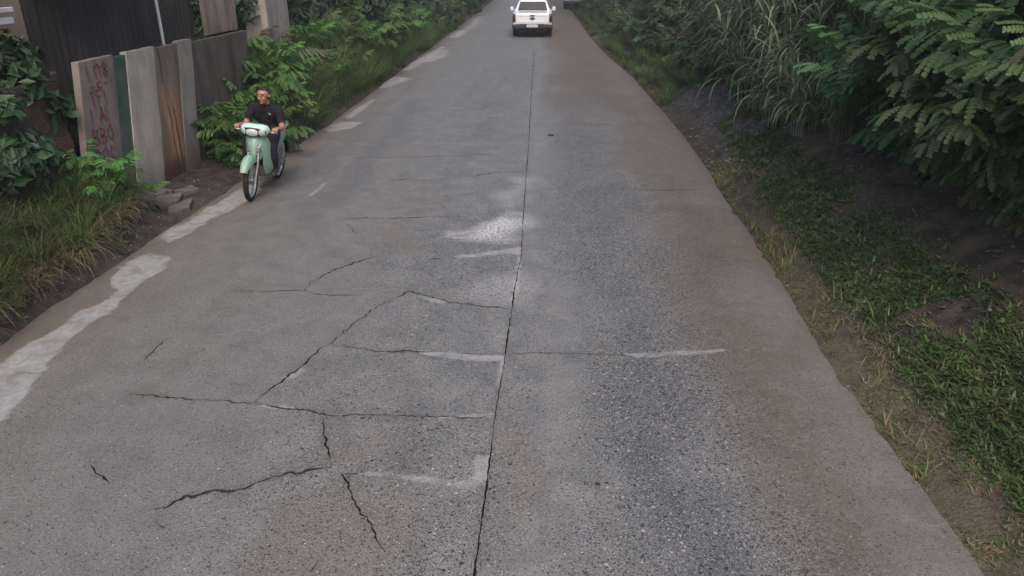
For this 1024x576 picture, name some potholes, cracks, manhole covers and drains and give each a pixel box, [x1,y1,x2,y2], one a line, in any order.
crack [242,257,372,296]
crack [135,291,502,552]
